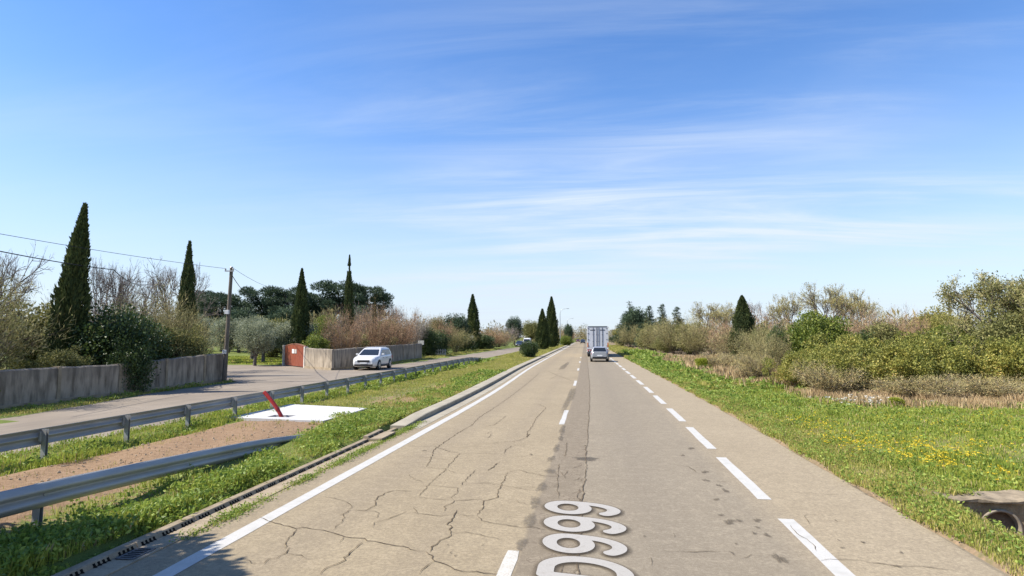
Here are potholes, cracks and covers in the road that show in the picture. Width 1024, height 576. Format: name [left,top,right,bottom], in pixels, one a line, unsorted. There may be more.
crack [242,385,582,574]
drain grate [115,547,156,560]
